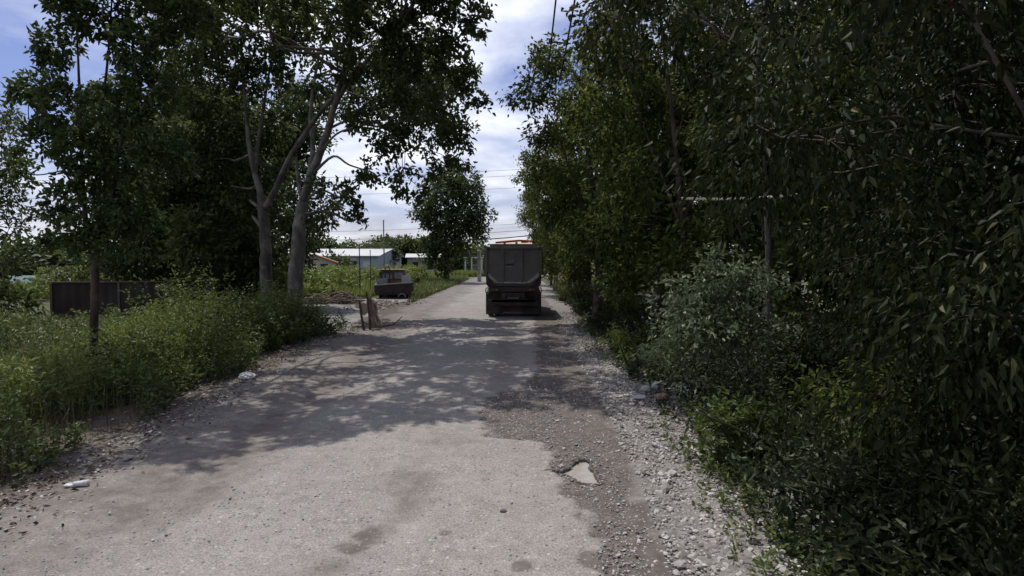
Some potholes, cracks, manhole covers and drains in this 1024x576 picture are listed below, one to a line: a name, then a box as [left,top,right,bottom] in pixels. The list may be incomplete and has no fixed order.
pothole [544,458,604,486]
